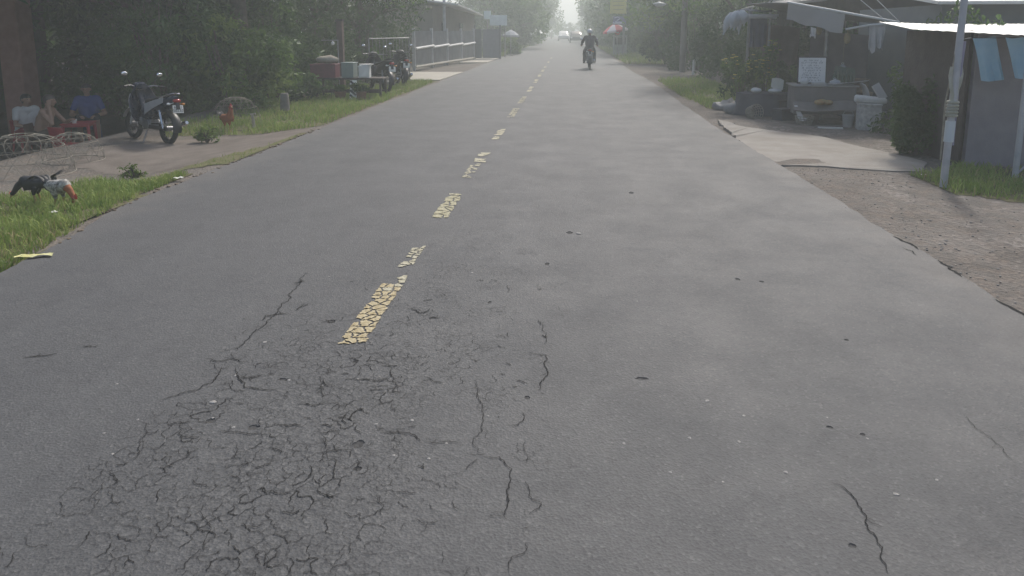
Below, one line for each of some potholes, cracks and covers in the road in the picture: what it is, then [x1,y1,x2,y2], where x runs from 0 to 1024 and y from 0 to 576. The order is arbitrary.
crack [0,206,572,576]
crack [832,482,888,572]
